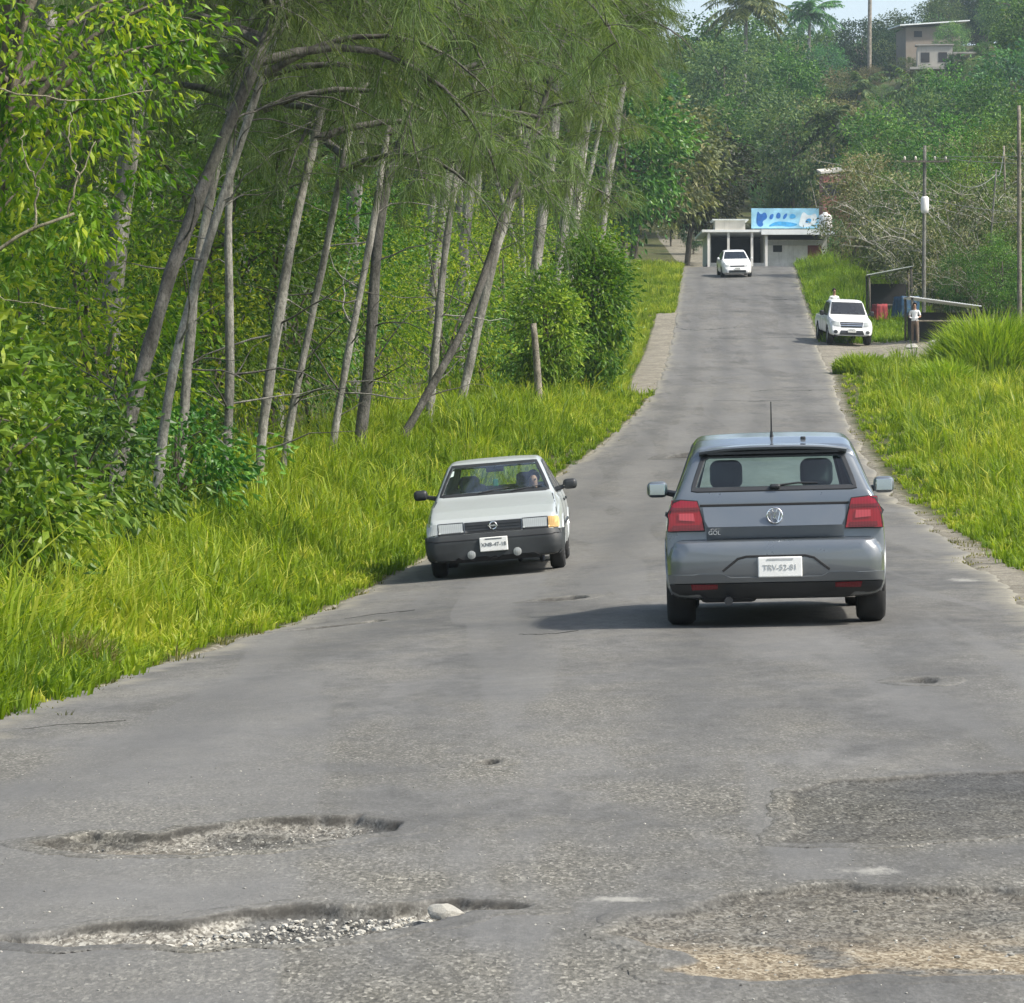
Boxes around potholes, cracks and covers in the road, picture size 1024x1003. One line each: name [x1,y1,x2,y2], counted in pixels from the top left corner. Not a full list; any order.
crack [25,720,126,729]
pothole [513,594,605,603]
pothole [0,894,571,954]
pothole [580,879,1024,987]
pothole [0,811,428,859]
pothole [875,675,967,686]
